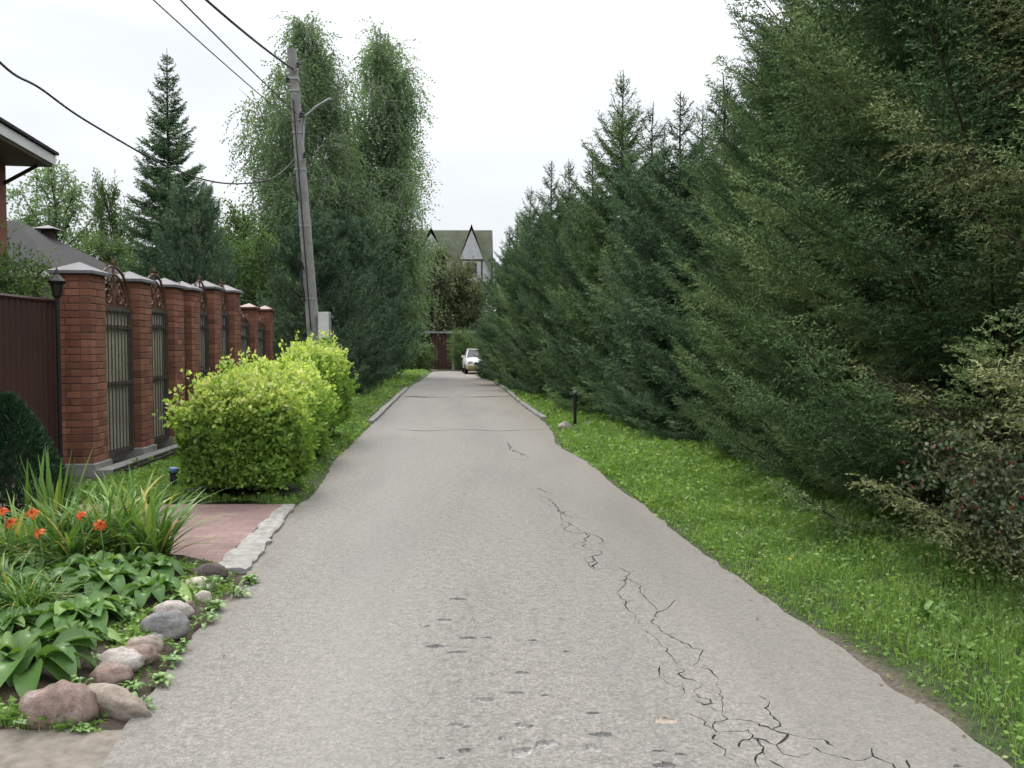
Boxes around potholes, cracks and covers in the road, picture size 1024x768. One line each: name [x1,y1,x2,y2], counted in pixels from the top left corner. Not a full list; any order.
crack [537,488,911,768]
